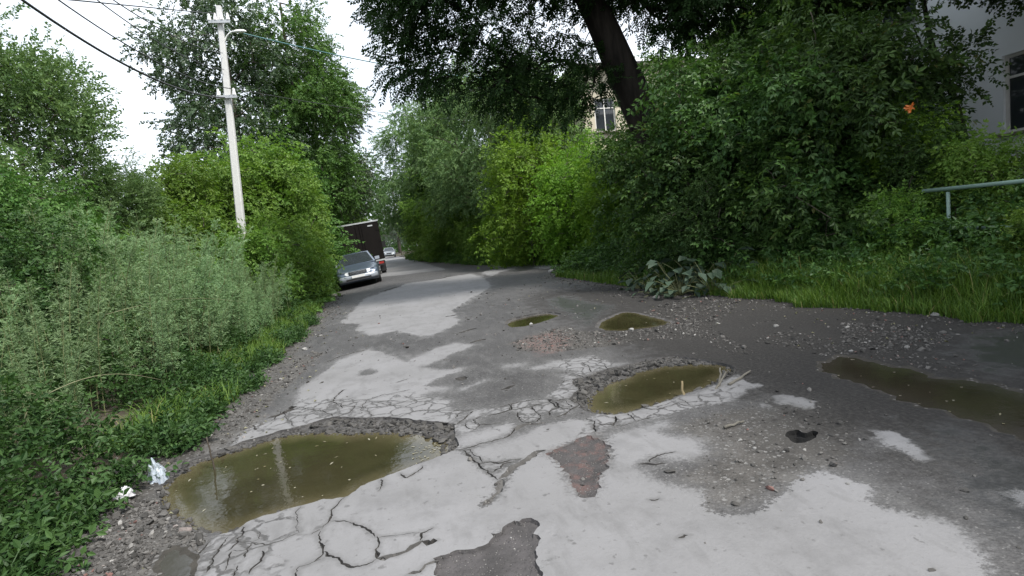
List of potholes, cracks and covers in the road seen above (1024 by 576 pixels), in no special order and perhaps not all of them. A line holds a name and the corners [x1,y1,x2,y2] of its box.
pothole [504,312,561,327]
crack [257,379,475,427]
pothole [595,312,675,331]
pothole [152,416,459,534]
crack [196,497,439,576]
pothole [568,356,736,415]
crack [455,360,707,505]
pothole [785,430,818,443]
pothole [815,354,1024,442]
